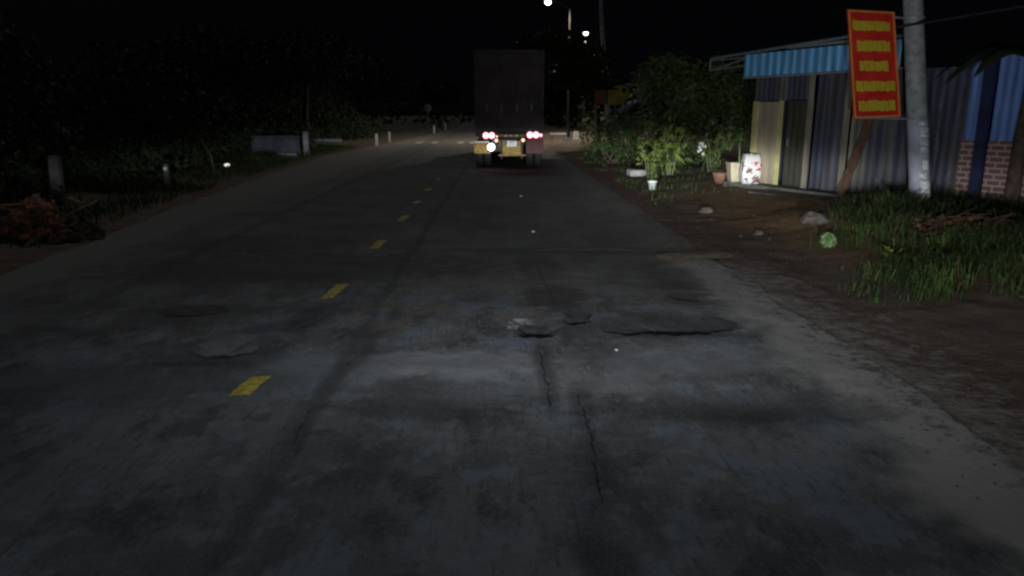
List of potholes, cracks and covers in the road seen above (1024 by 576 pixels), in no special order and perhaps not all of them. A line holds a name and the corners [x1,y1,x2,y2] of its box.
crack [538,343,552,410]
pothole [599,316,738,336]
pothole [667,292,701,302]
pothole [563,310,593,325]
pothole [507,318,566,338]
pothole [154,305,230,318]
crack [576,392,603,505]
